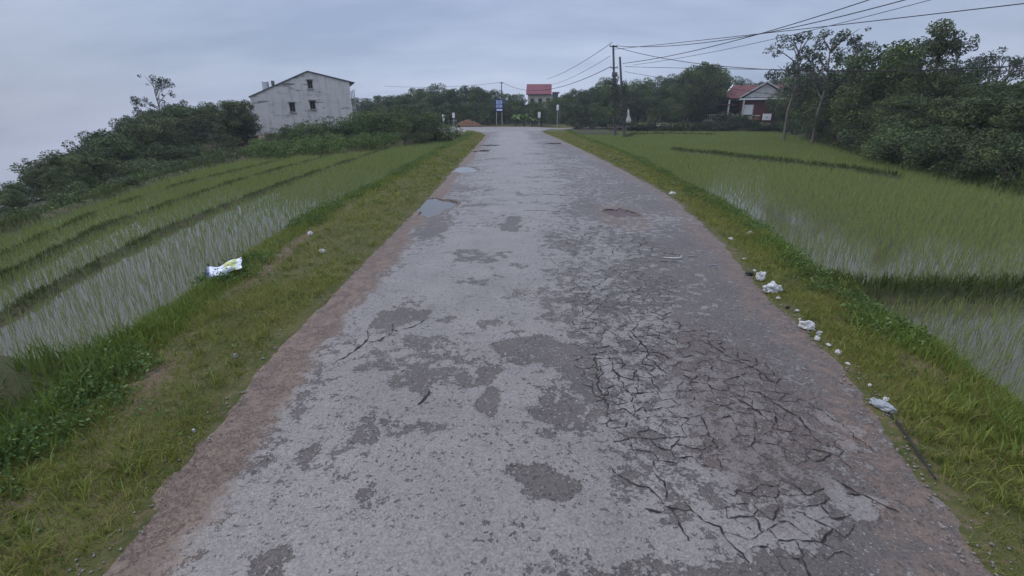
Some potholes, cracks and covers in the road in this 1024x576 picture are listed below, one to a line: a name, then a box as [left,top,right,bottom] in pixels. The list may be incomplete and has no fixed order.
pothole [416,197,461,220]
crack [569,264,899,576]
crack [337,320,424,361]
pothole [601,208,643,218]
